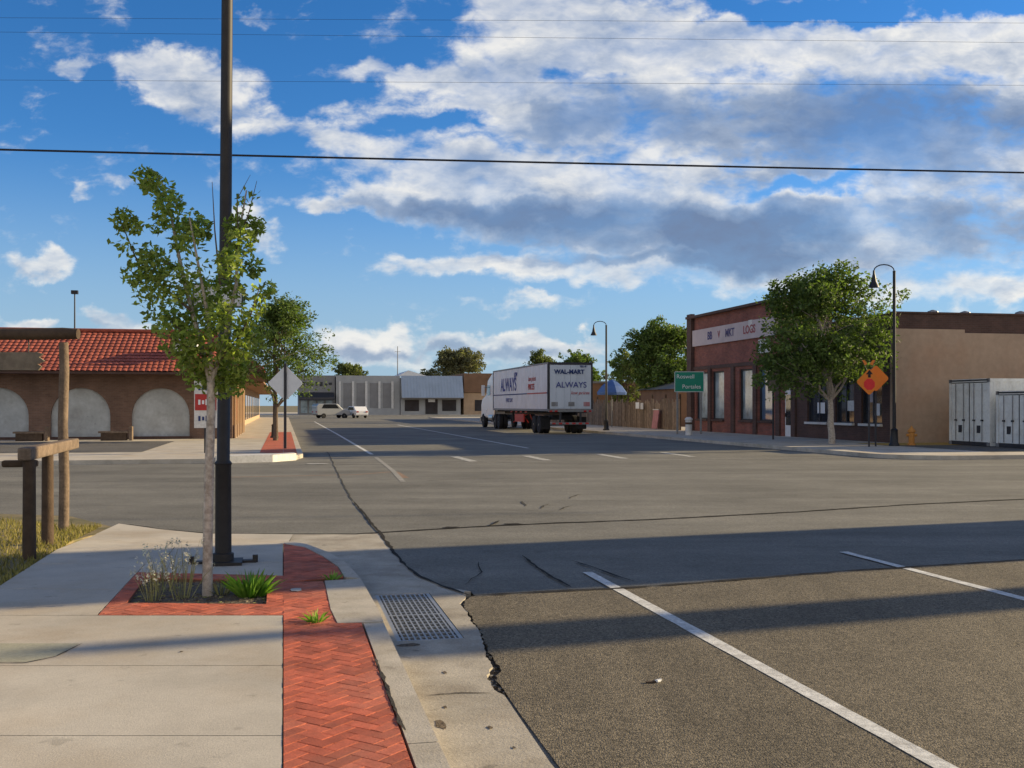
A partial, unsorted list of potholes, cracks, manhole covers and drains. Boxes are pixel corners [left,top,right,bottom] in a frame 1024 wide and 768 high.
drain grate [375,593,463,641]
crack [374,659,406,730]
crack [327,452,482,595]
